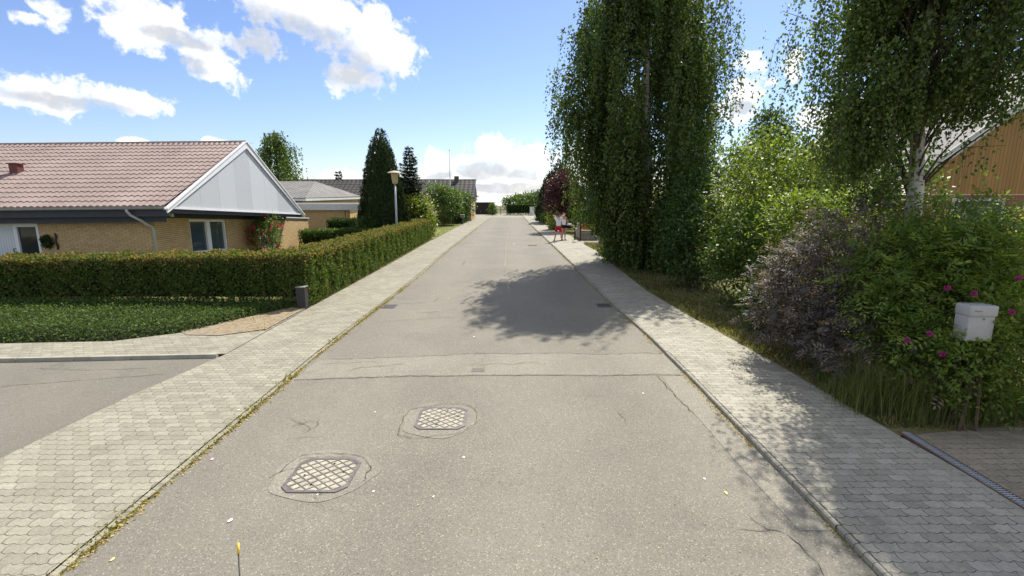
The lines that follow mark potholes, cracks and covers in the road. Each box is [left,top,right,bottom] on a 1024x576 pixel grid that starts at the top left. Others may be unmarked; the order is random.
crack [269,418,371,480]
